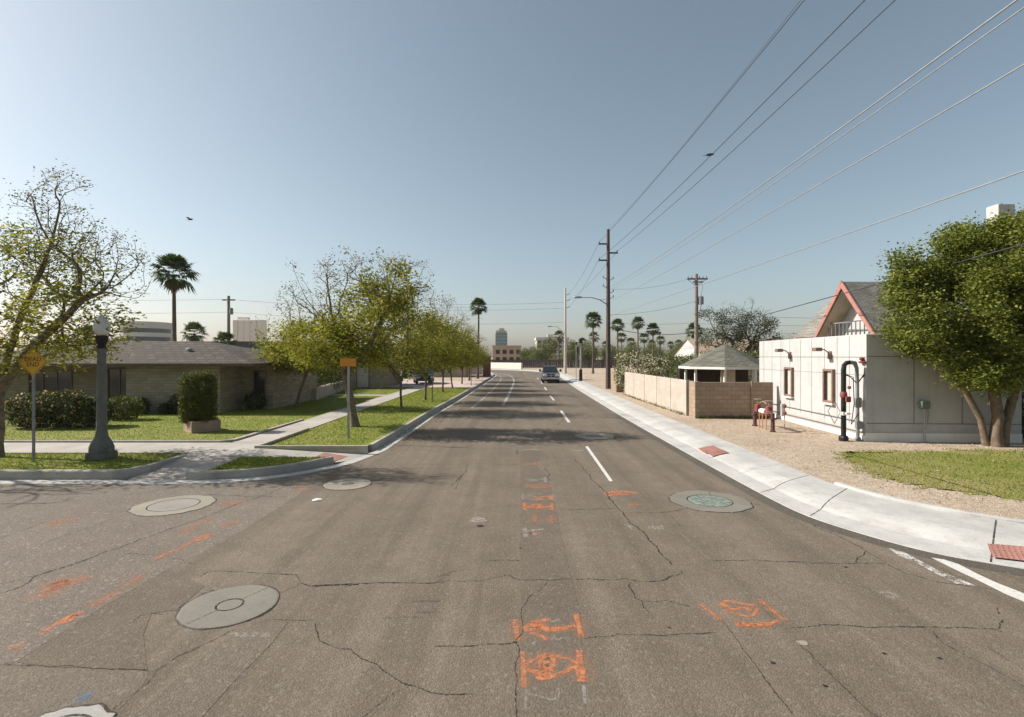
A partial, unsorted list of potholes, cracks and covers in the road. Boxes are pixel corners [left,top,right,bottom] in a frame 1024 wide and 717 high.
manhole cover [38,703,117,717]
crack [584,623,795,717]
crack [715,526,988,589]
crack [792,608,1019,717]
manhole cover [175,584,280,630]
crack [129,560,688,717]
crack [6,629,234,712]
manhole cover [322,478,372,490]
manhole cover [667,490,753,513]
manhole cover [126,495,216,517]
